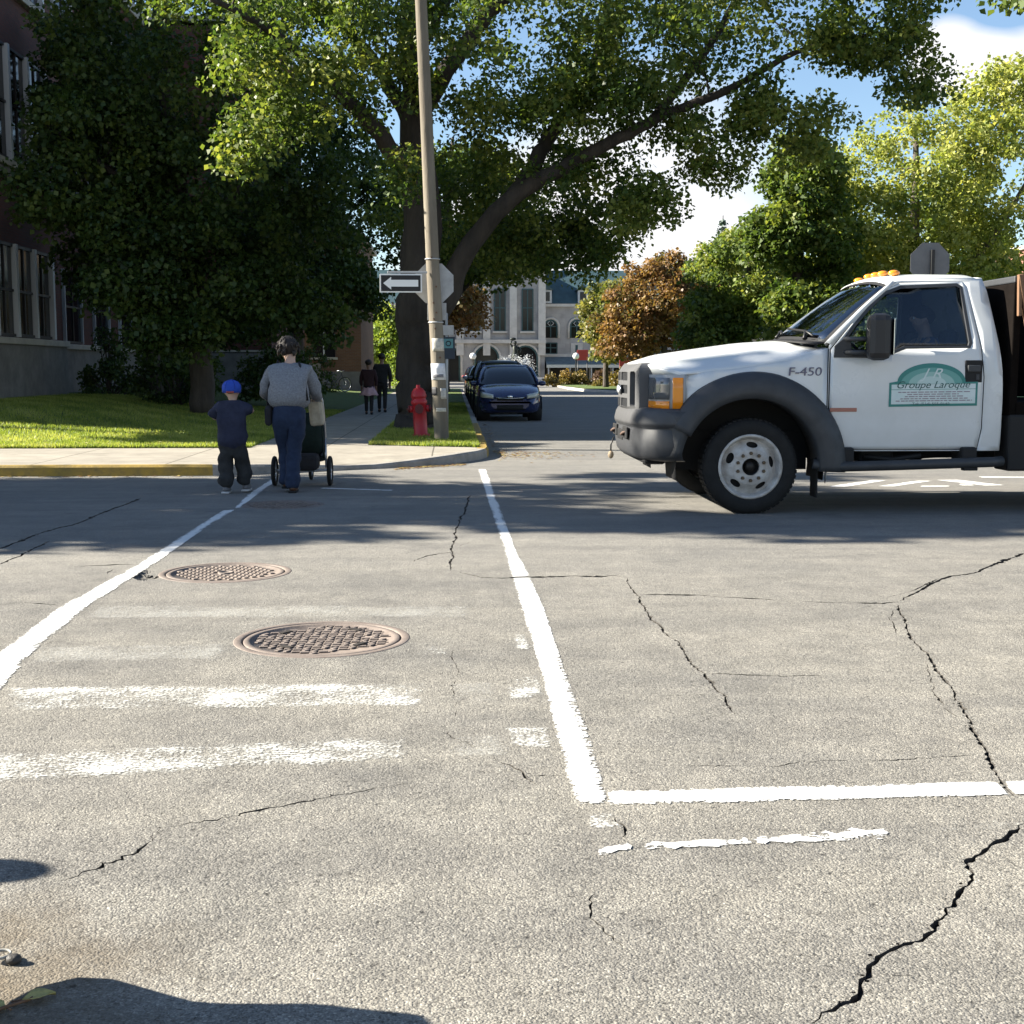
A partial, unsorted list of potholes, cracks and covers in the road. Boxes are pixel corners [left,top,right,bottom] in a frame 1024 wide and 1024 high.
crack [372,496,1024,797]
manhole cover [233,621,410,658]
crack [813,823,1024,1023]
crack [53,783,411,882]
manhole cover [158,562,292,583]
crack [0,498,141,564]
